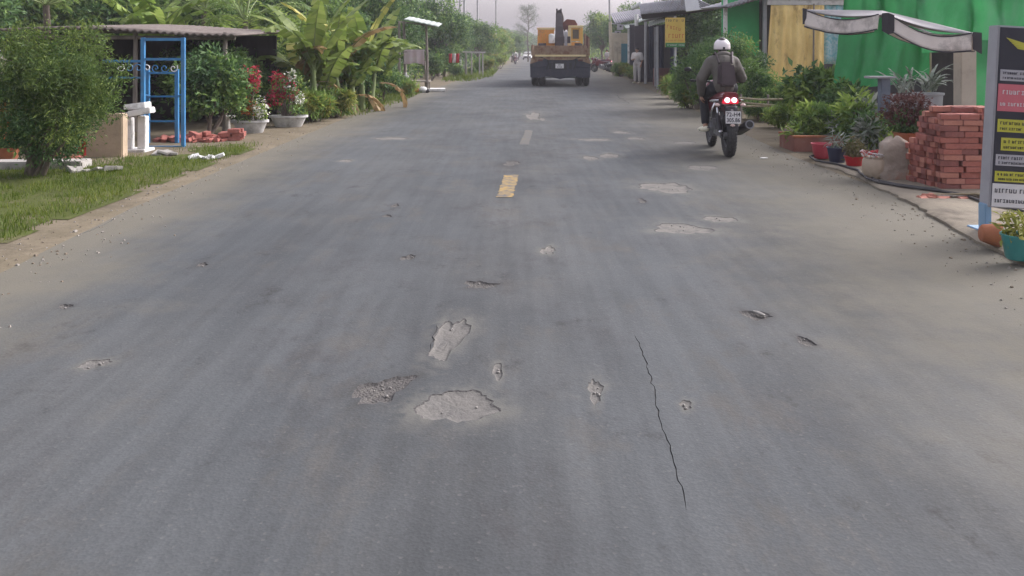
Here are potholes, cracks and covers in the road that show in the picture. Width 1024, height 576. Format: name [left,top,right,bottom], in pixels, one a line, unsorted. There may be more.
pothole [428,318,471,361]
pothole [587,379,604,406]
pothole [76,359,113,370]
crack [635,337,686,506]
pothole [413,389,501,423]
pothole [464,281,500,289]
pothole [738,311,773,321]
pothole [492,363,503,381]
pothole [352,375,418,404]
pothole [796,336,817,346]
